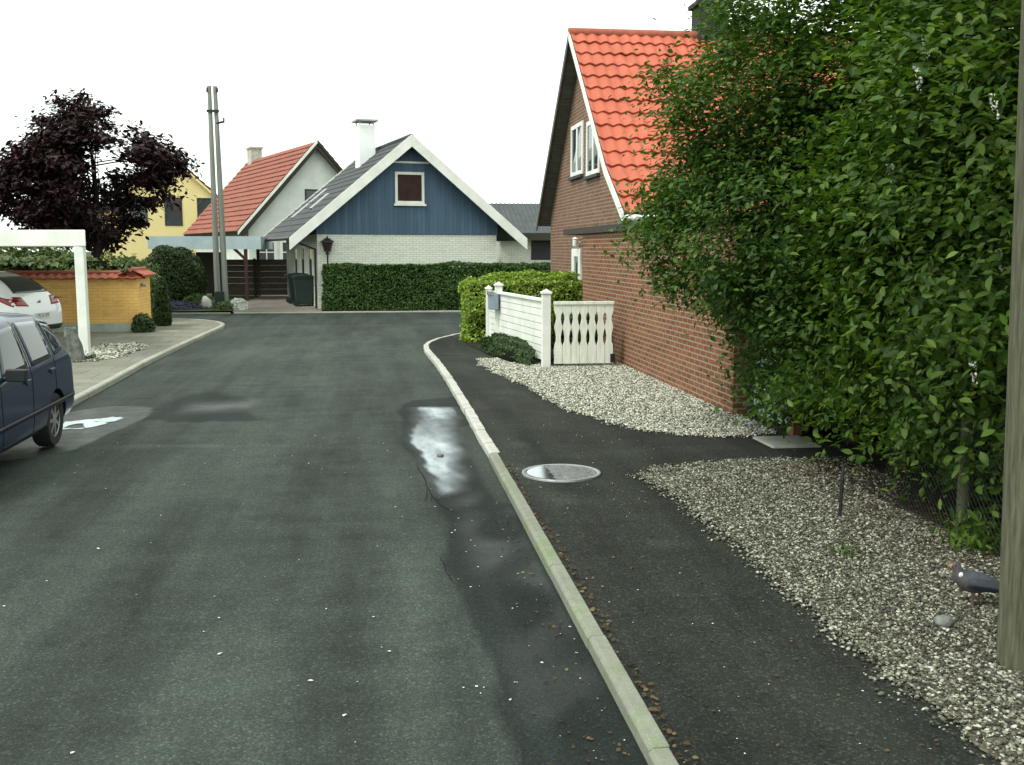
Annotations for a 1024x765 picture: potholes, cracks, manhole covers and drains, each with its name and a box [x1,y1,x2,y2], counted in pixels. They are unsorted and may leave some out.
manhole cover [522,464,601,482]
